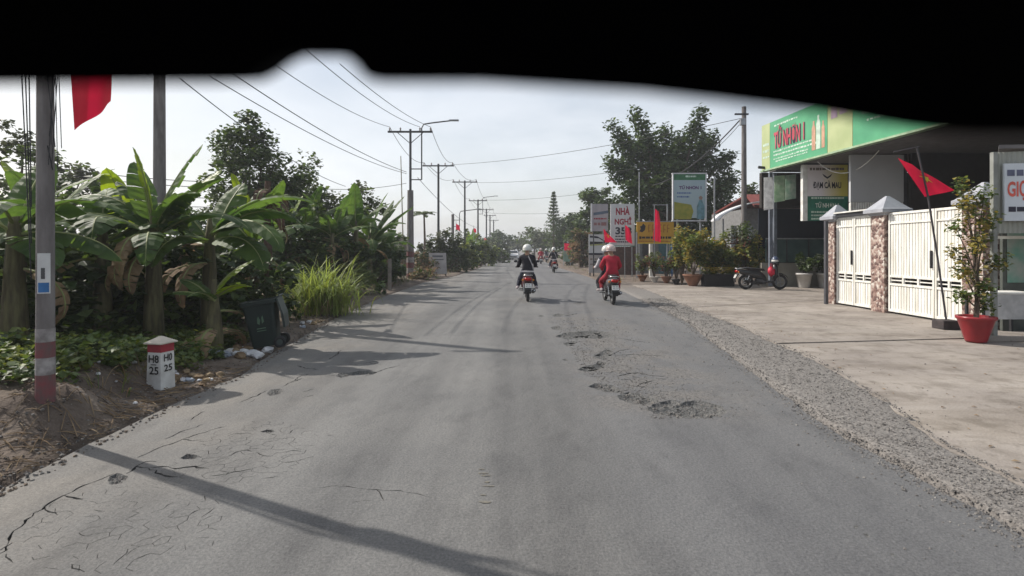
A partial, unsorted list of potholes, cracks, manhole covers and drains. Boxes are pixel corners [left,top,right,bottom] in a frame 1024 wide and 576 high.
crack [0,412,312,573]
crack [323,485,432,502]
pothole [589,383,621,393]
pothole [108,473,128,485]
pothole [336,370,376,378]
pothole [556,330,616,339]
pothole [646,400,727,419]
pothole [578,361,608,372]
